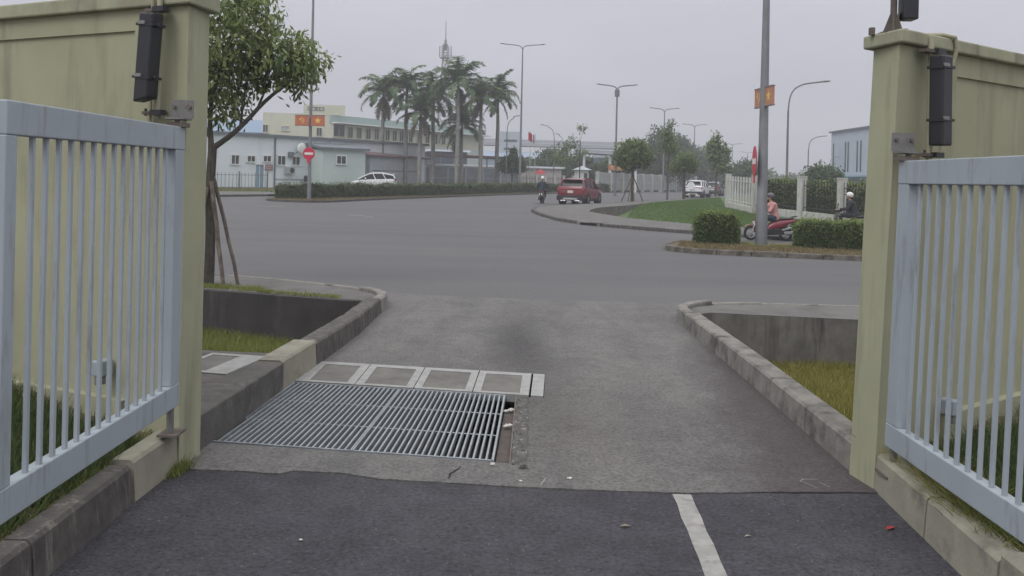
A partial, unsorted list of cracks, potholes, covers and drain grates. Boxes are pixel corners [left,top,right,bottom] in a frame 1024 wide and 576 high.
drain grate [351,388,506,462]
